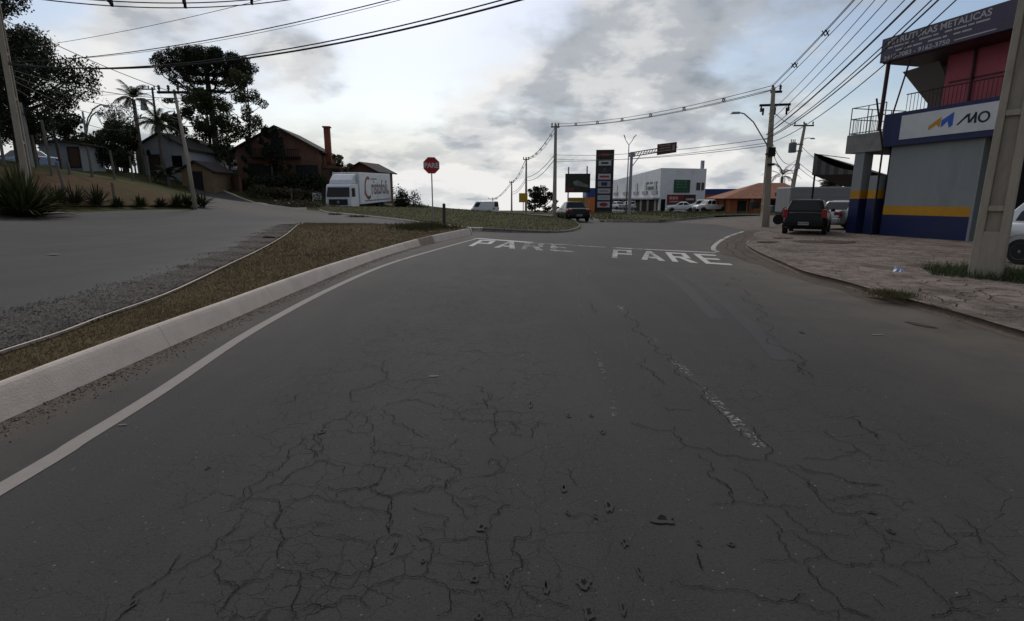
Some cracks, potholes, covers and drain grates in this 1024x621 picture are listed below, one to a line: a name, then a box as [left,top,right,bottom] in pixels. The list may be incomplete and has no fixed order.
crack [116,349,596,621]
pothole [649,510,675,524]
pothole [575,574,592,590]
crack [623,307,1022,621]
